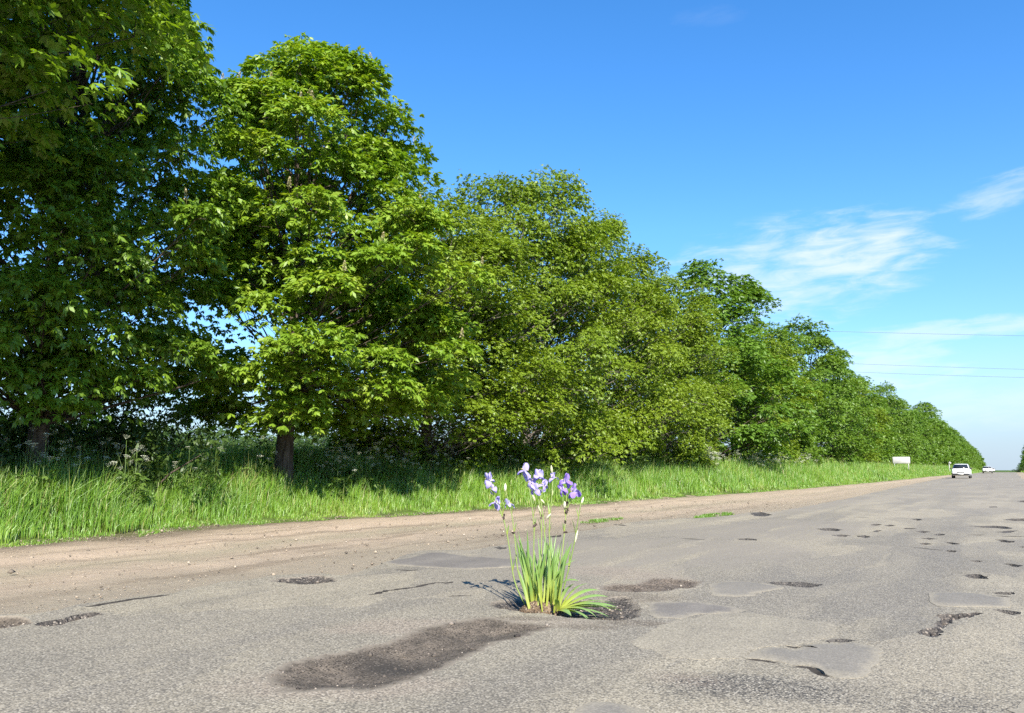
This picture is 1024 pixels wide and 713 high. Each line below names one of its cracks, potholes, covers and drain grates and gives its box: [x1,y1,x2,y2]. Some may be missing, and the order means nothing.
pothole [598,578,702,592]
pothole [0,615,34,629]
pothole [918,612,984,637]
crack [85,595,167,607]
pothole [489,596,645,621]
pothole [35,612,103,626]
pothole [271,575,337,585]
